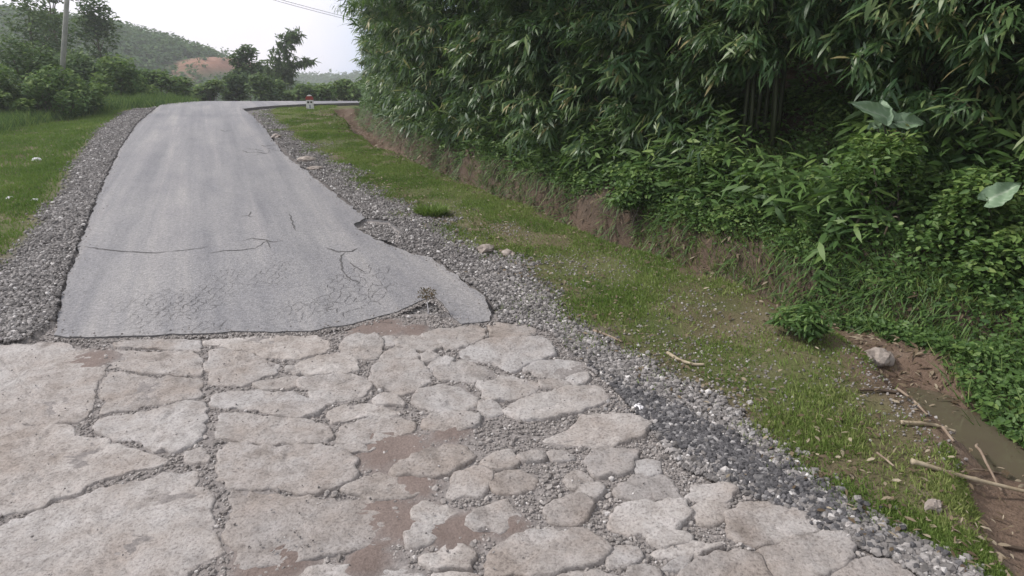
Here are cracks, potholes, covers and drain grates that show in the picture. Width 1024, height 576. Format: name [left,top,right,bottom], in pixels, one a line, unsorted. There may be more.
pothole [354,219,399,244]
crack [85,214,296,331]
crack [281,248,394,321]
